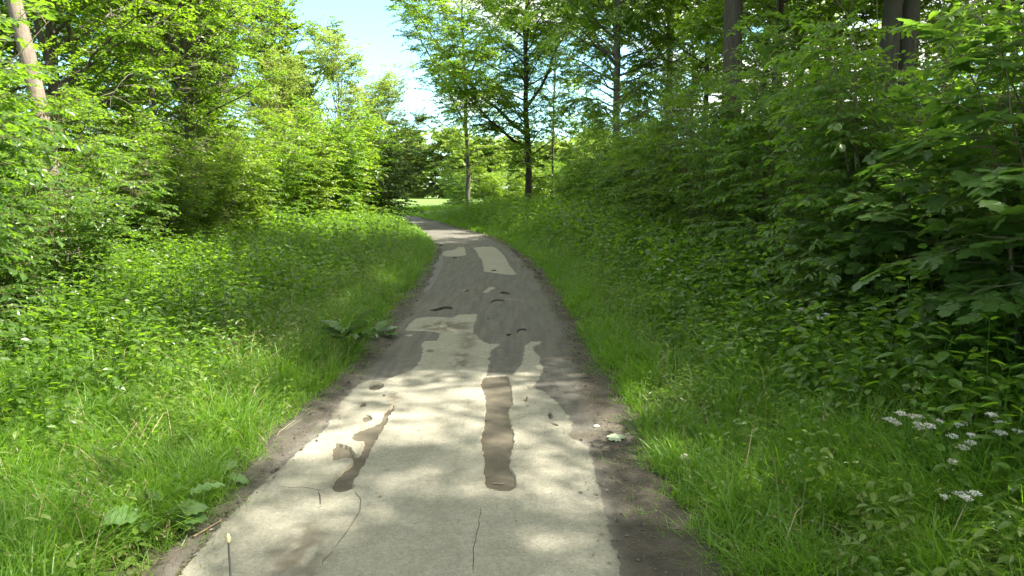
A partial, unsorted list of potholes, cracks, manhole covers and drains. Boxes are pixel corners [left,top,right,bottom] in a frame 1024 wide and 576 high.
crack [281,486,361,564]
pothole [480,375,517,491]
pothole [330,405,395,492]
